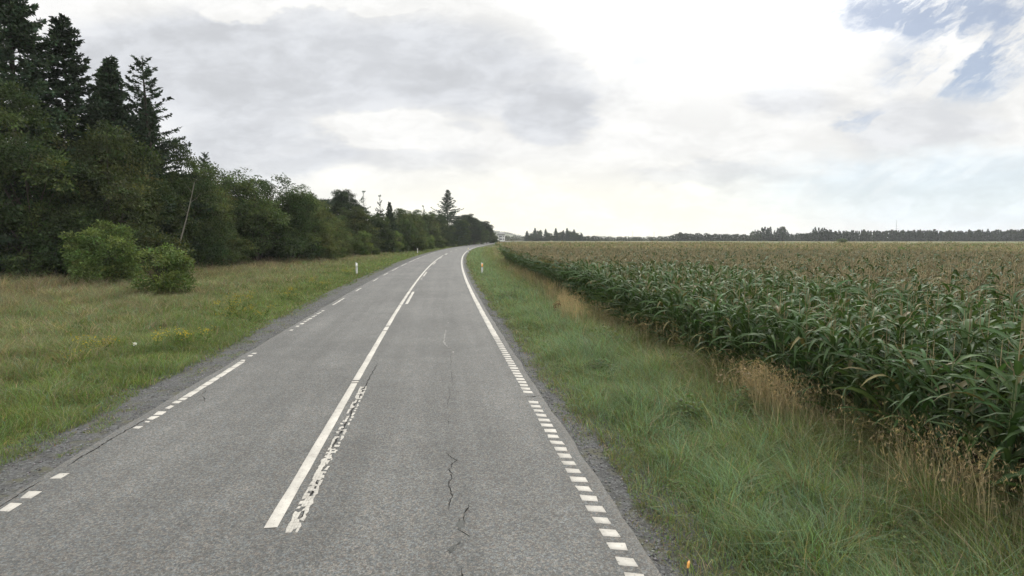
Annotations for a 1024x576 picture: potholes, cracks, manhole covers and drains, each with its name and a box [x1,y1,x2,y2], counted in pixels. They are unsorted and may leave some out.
crack [446,453,470,552]
